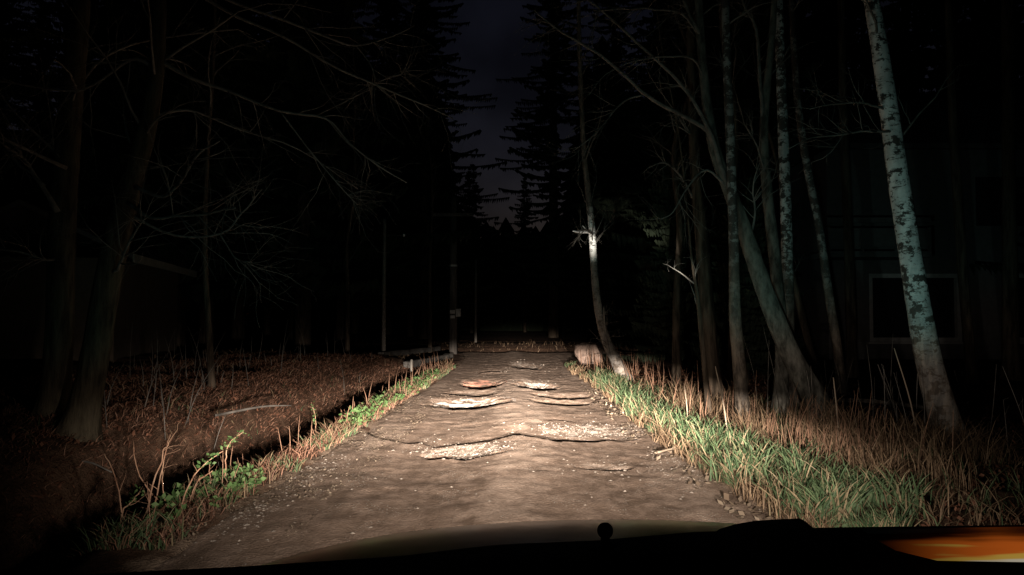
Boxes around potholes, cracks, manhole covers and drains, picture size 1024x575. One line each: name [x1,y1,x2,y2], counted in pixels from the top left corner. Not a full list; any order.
pothole [420,442,513,461]
pothole [530,392,599,400]
pothole [511,380,562,391]
pothole [505,362,545,370]
pothole [457,378,507,390]
pothole [529,398,605,406]
pothole [417,397,516,410]
pothole [529,423,650,443]
